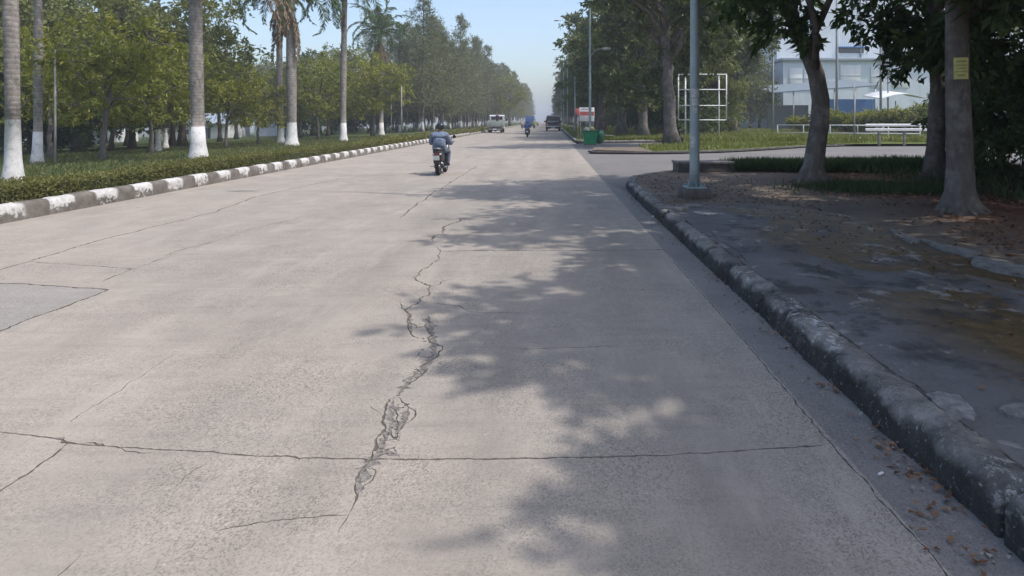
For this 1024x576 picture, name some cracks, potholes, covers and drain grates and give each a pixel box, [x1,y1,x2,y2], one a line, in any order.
crack [0,178,340,332]
crack [0,218,821,532]
